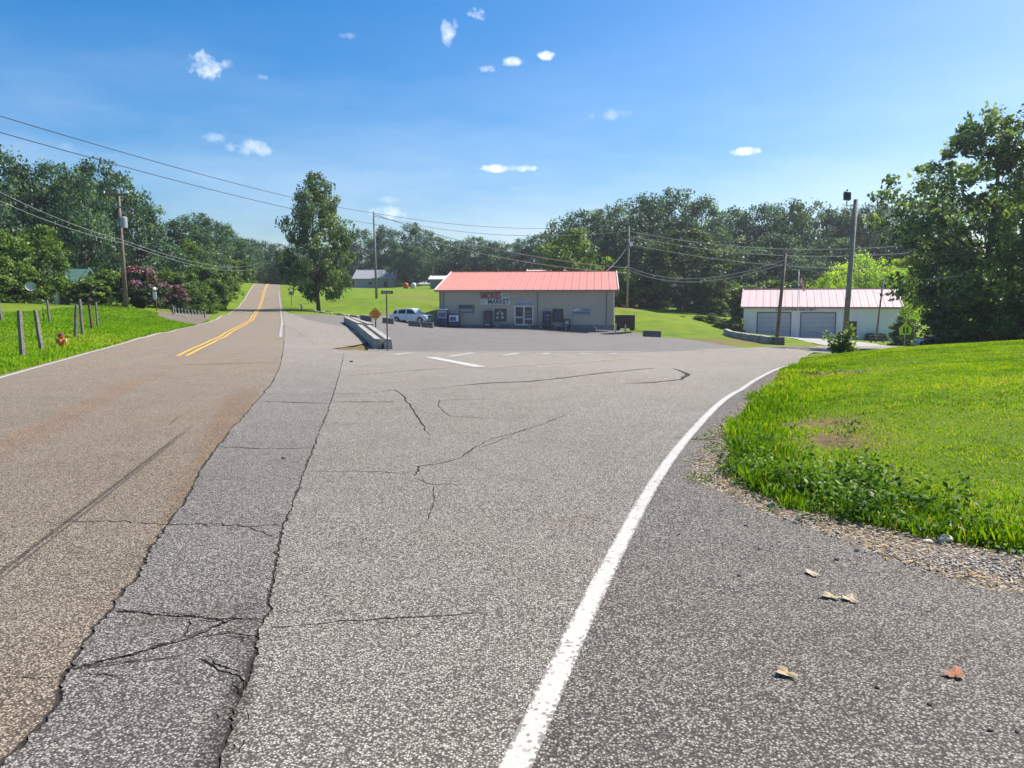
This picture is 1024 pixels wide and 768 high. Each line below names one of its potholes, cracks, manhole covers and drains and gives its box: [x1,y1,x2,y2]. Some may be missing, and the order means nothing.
crack [331,367,690,523]
crack [5,609,483,694]
crack [47,520,283,538]
